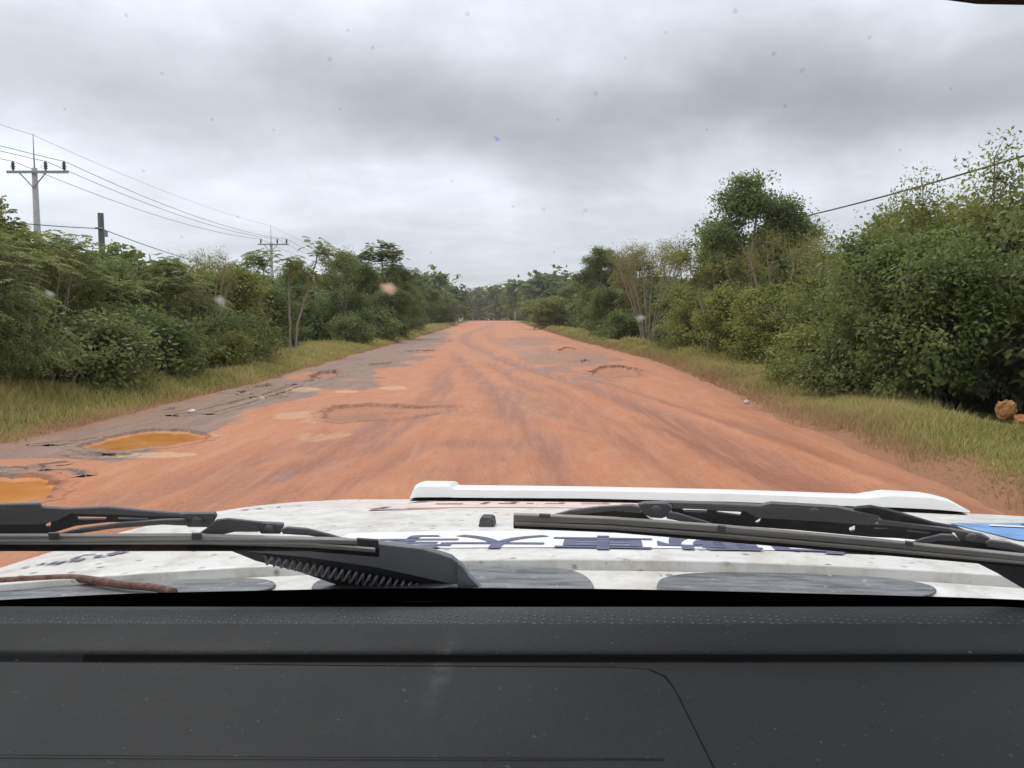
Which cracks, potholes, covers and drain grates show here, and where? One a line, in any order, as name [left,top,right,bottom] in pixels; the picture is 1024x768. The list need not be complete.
pothole [0,471,80,503]
pothole [577,365,656,377]
crack [0,437,101,477]
pothole [301,369,353,380]
pothole [309,402,463,423]
pothole [63,427,222,453]
crack [165,377,325,417]
